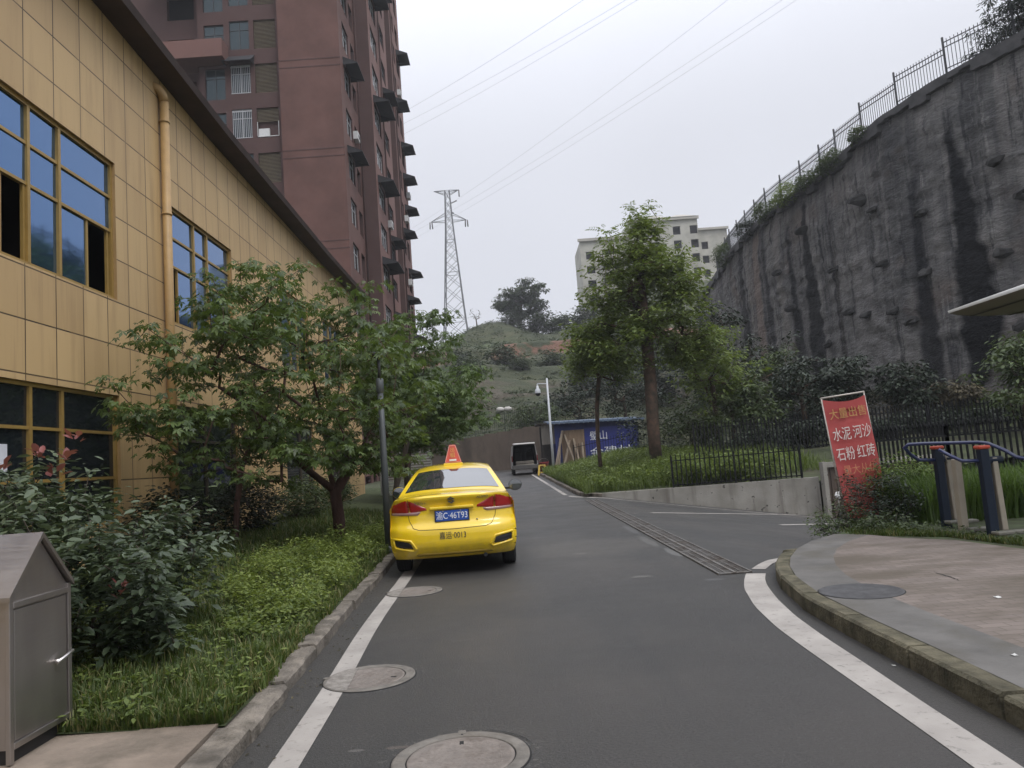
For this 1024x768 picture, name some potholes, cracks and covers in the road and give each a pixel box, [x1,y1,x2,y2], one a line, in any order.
manhole cover [389,730,532,768]
drain grate [585,499,752,575]
manhole cover [817,583,906,599]
manhole cover [386,586,443,598]
manhole cover [322,664,417,693]
